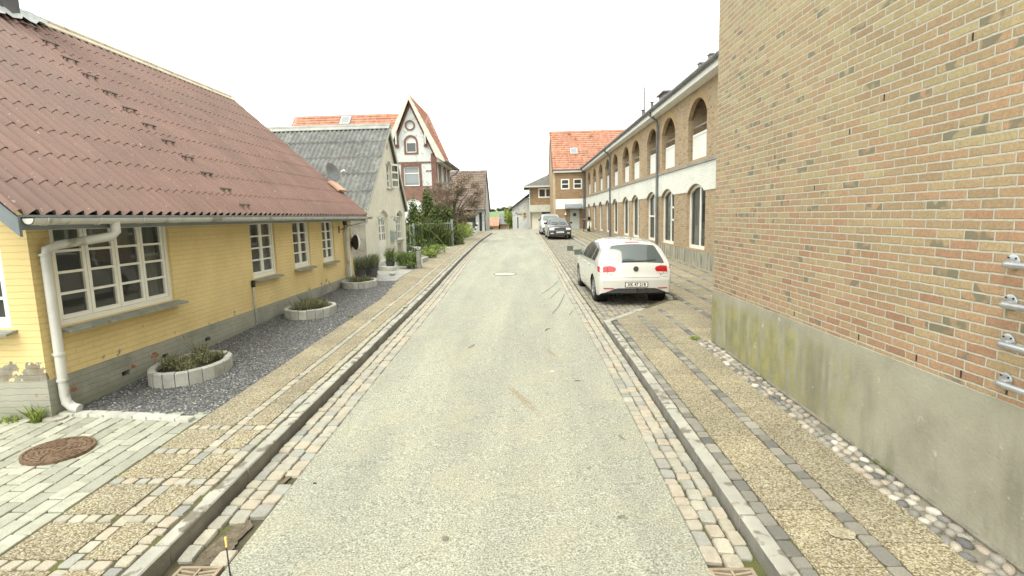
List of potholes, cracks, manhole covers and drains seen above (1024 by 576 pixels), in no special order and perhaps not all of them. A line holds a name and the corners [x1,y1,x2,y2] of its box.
manhole cover [19,436,97,467]
drain grate [172,566,224,576]
drain grate [708,568,757,576]
pothole [194,519,253,566]
